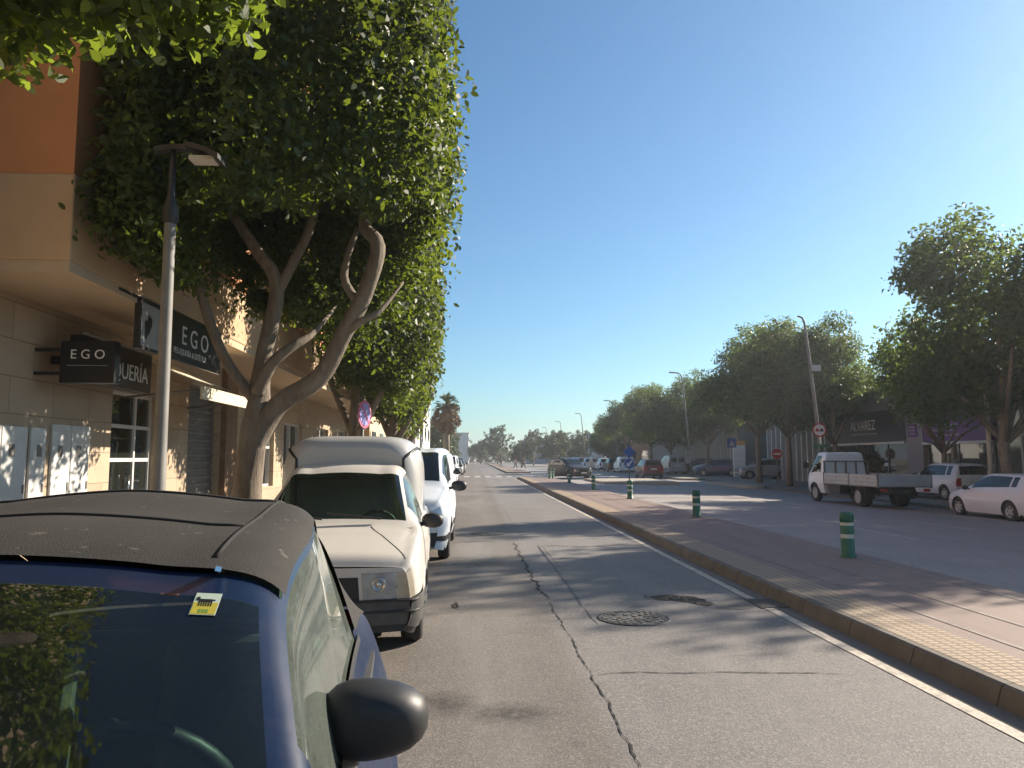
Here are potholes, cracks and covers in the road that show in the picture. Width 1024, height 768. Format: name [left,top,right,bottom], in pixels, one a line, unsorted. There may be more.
crack [513,543,836,768]
manhole cover [597,610,671,626]
